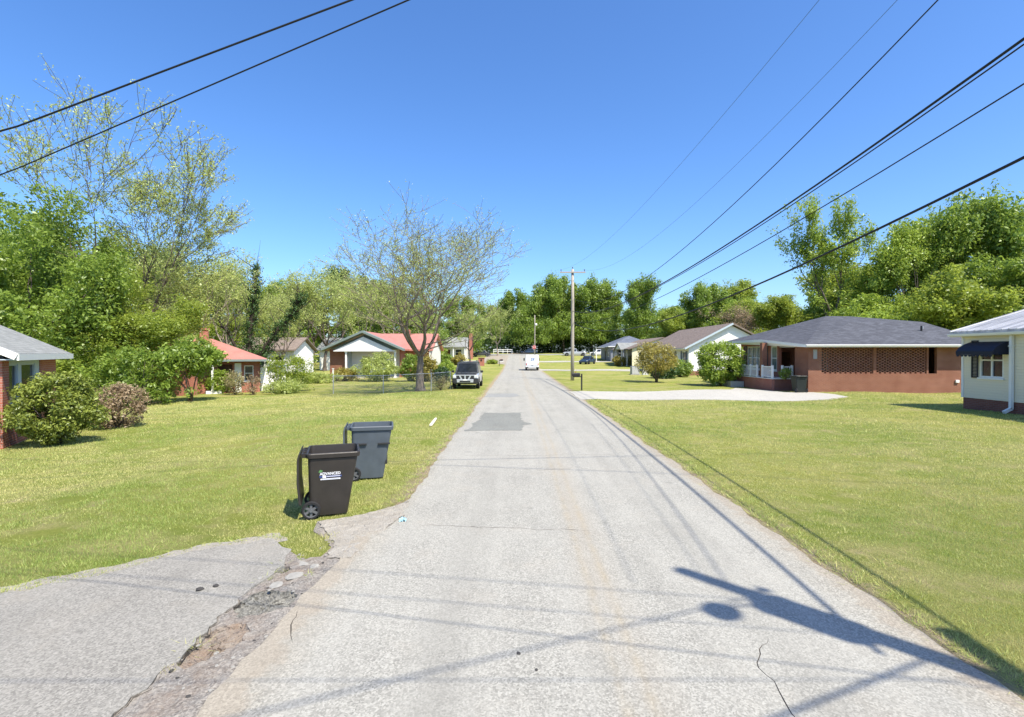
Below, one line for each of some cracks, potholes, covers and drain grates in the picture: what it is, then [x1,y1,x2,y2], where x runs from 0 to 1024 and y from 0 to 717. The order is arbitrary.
pothole [179,622,251,669]
crack [756,642,795,717]
pothole [232,588,299,618]
